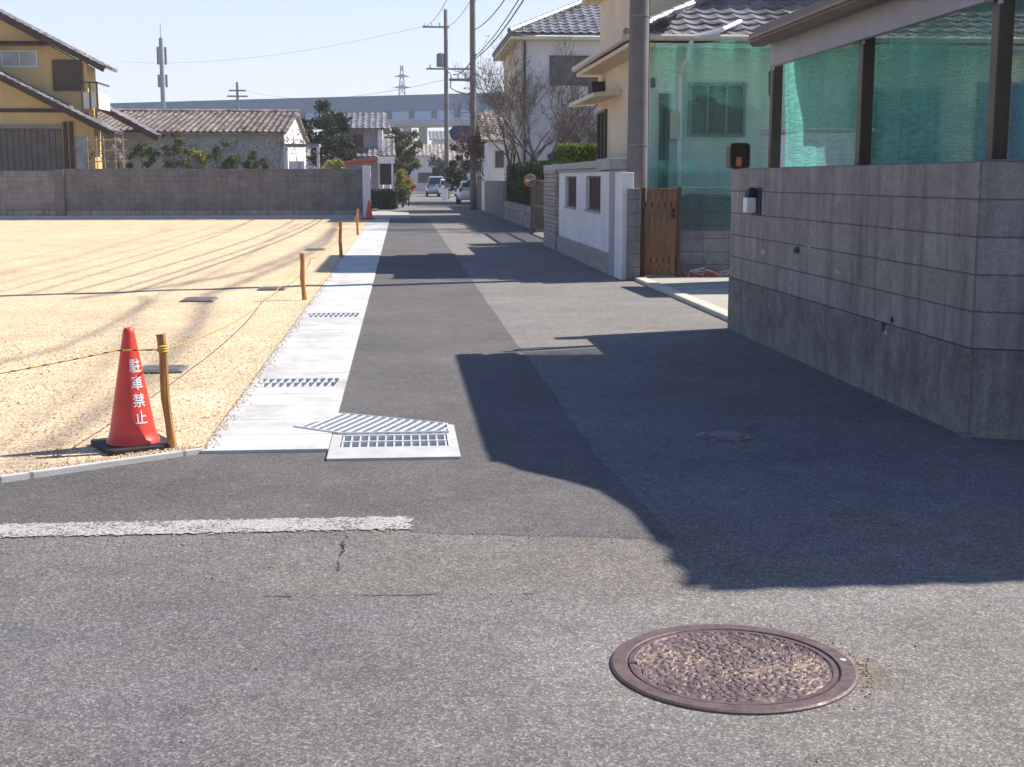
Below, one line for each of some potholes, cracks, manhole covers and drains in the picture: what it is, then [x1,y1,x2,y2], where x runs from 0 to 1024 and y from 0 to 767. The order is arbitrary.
drain grate [259,378,339,387]
utility cover [696,430,756,442]
drain grate [293,413,461,461]
crack [336,536,349,572]
manhole cover [610,624,879,715]
